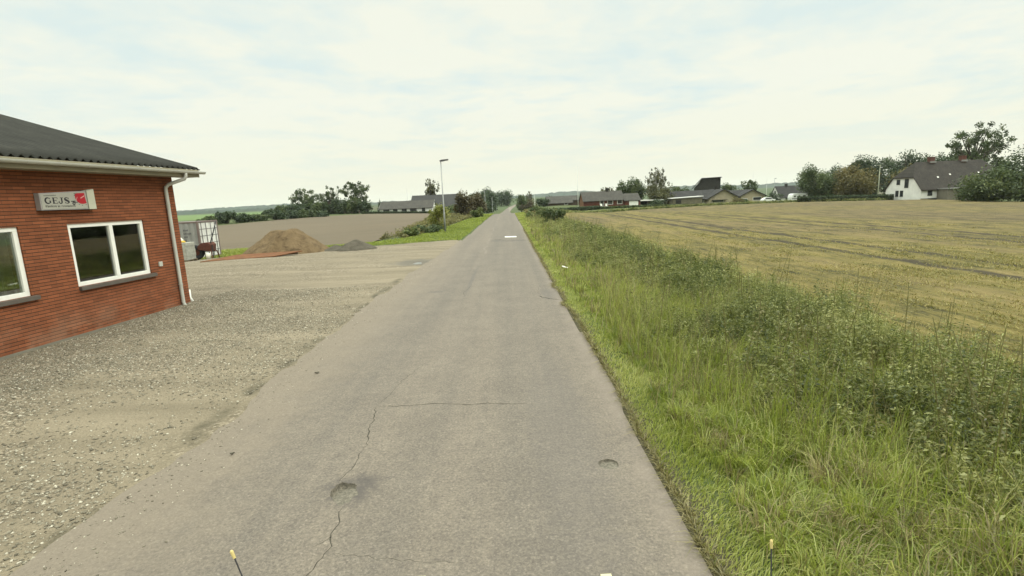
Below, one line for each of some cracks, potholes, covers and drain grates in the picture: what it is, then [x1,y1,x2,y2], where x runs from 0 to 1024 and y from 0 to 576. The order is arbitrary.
crack [339,365,527,481]
pothole [330,482,358,506]
pothole [598,459,619,469]
